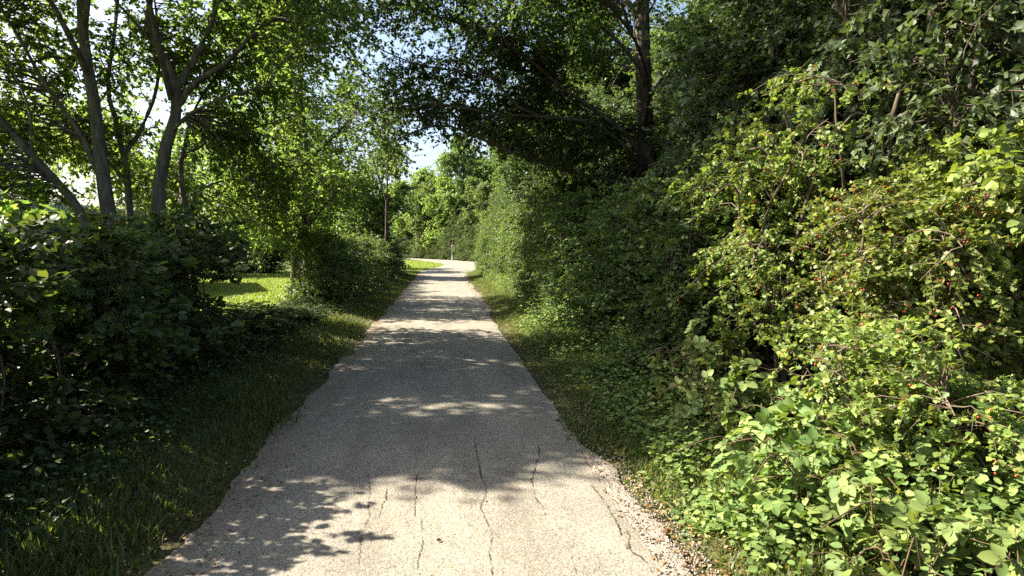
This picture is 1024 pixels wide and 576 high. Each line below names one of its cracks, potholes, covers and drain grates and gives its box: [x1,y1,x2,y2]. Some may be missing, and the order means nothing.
crack [591,485,654,575]
crack [413,474,423,567]
crack [352,474,387,563]
crack [474,437,493,574]
